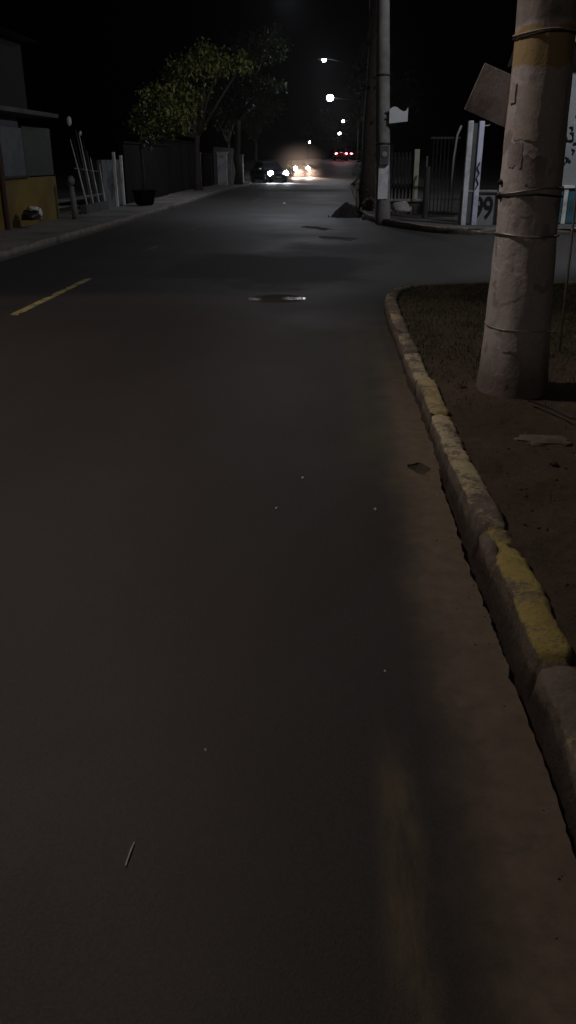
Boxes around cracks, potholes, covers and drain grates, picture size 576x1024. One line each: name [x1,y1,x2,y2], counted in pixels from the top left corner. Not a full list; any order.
pothole [407,463,431,475]
manhole cover [248,294,306,303]
